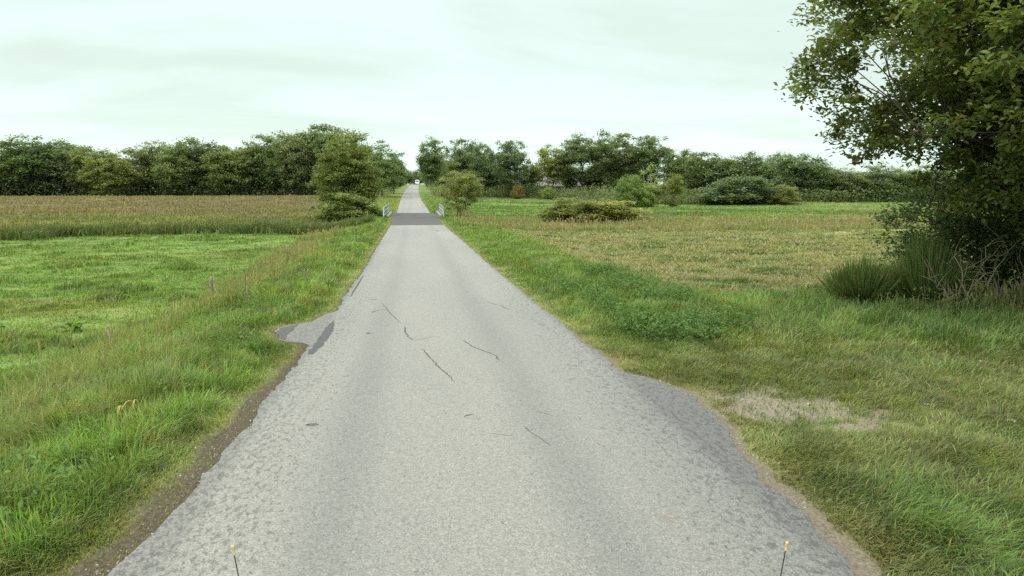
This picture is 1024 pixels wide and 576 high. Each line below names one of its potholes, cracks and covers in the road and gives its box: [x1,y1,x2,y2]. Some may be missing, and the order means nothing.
crack [350,276,499,381]
